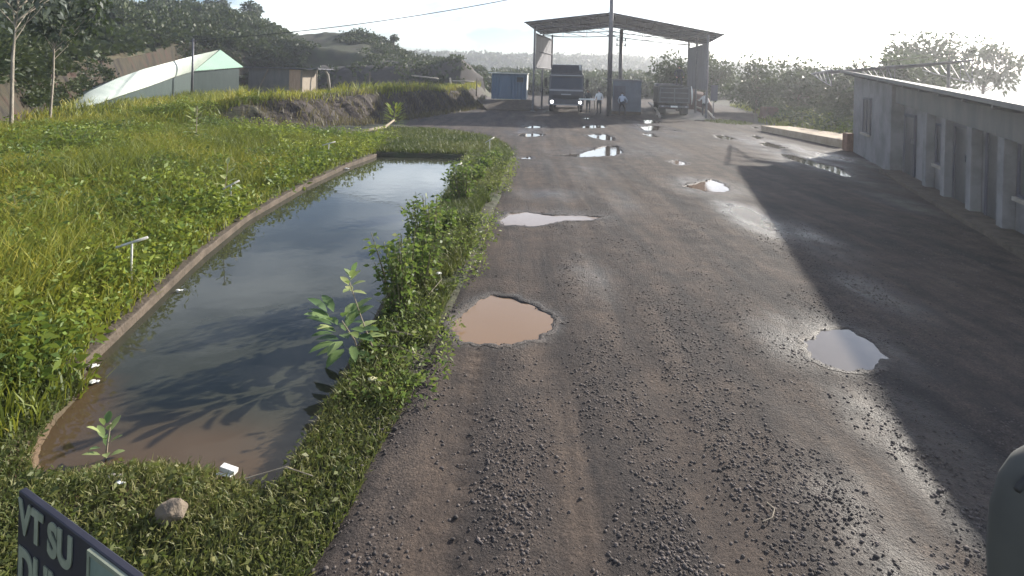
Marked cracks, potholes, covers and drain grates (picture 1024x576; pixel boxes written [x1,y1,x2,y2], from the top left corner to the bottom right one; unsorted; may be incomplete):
pothole [758,141,789,149]
pothole [794,325,900,376]
pothole [677,179,736,193]
pothole [549,145,627,158]
pothole [443,292,564,348]
pothole [777,153,858,178]
pothole [583,133,618,141]
pothole [494,210,607,227]
